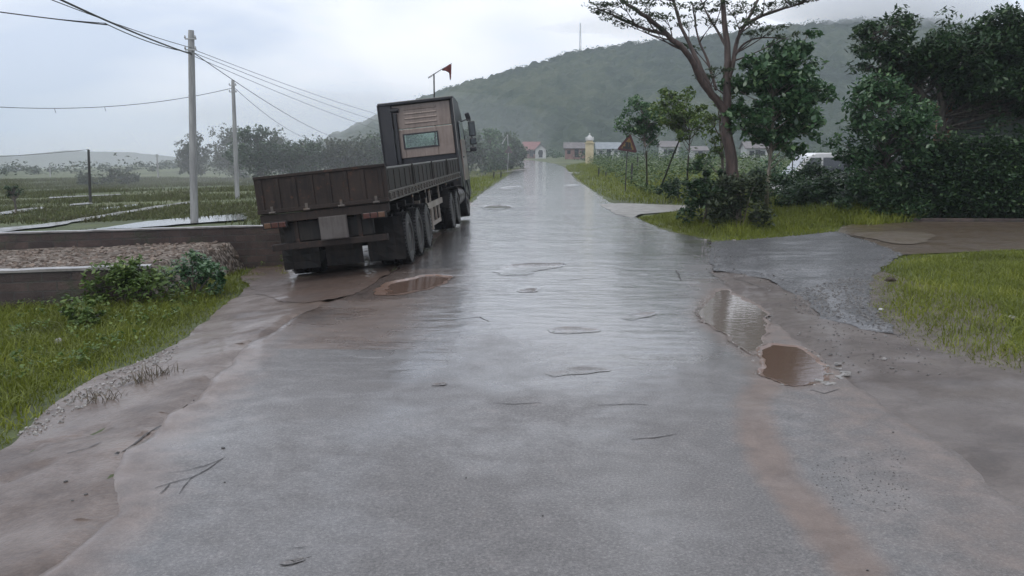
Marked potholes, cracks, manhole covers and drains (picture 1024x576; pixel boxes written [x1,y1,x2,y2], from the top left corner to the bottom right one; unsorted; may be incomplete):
pothole [696,289,772,355]
pothole [373,274,453,295]
crack [115,400,194,454]
pothole [752,341,851,386]
crack [155,458,223,494]
pothole [492,263,566,275]
pothole [545,366,612,377]
